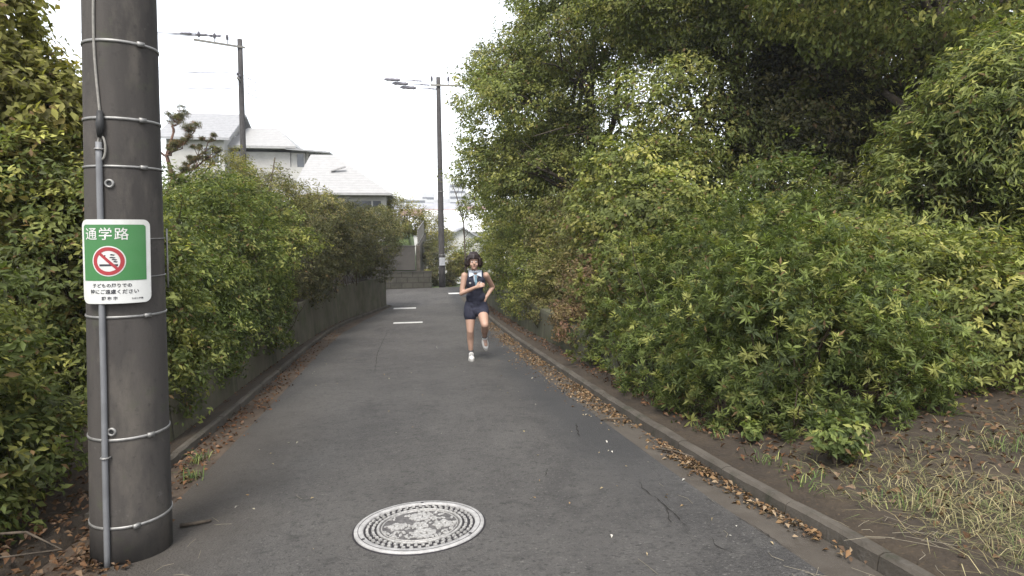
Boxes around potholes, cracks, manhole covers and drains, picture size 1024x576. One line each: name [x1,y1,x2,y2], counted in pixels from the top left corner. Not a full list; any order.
manhole cover [352,501,486,556]
crack [641,484,688,526]
